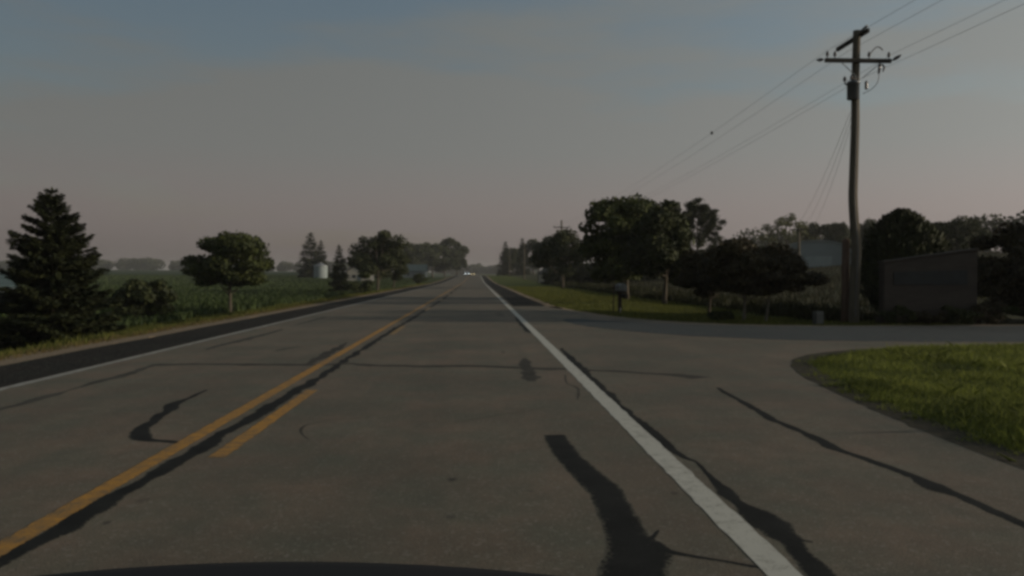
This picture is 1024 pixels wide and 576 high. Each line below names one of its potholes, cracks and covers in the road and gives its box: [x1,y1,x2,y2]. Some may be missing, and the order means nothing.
crack [564,375,580,399]
